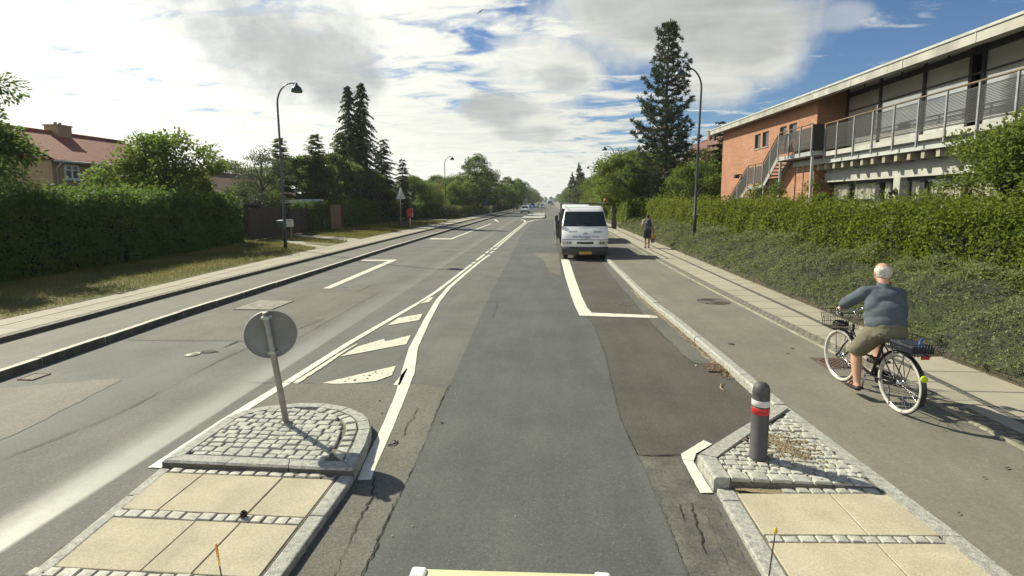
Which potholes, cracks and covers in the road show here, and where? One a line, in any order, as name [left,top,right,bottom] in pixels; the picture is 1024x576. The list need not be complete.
crack [678,502,726,559]
drain grate [702,363,728,373]
